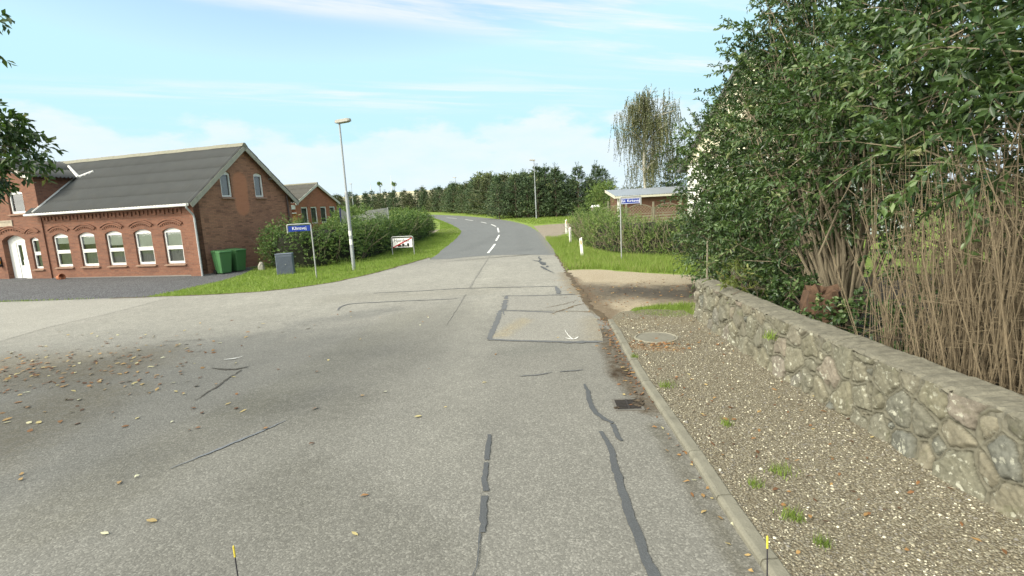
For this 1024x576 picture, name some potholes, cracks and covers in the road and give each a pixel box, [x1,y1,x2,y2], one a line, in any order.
manhole cover [634,332,678,343]
crack [199,366,248,398]
drain grate [611,398,645,411]
